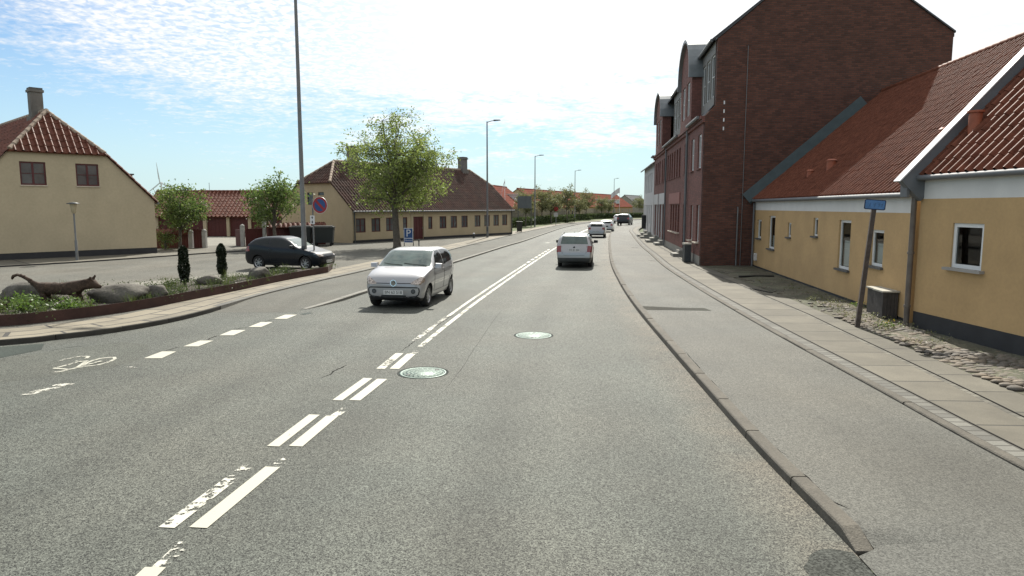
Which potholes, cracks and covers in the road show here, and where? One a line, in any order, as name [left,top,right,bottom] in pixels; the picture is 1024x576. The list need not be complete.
manhole cover [397,367,449,379]
